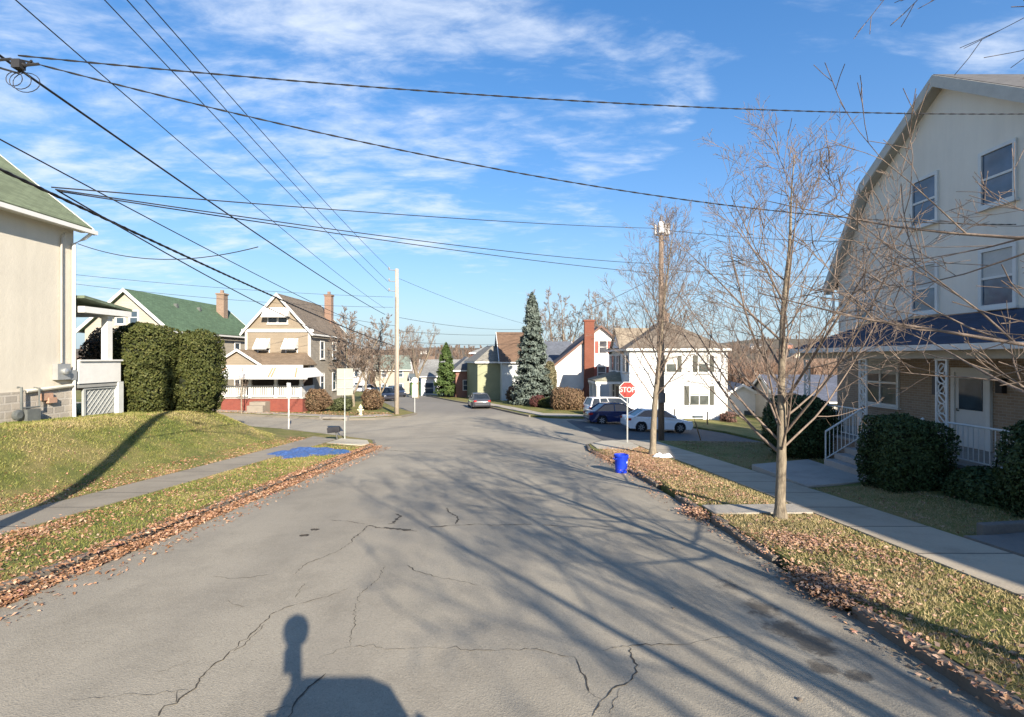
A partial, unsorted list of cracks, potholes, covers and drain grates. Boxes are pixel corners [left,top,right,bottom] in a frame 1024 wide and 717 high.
crack [85,514,413,716]
crack [332,568,732,716]
